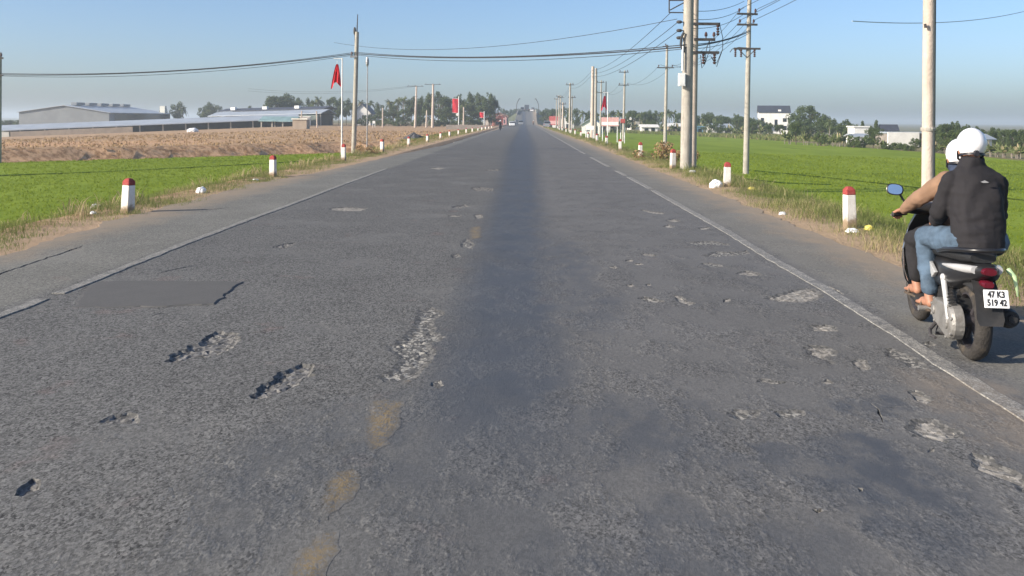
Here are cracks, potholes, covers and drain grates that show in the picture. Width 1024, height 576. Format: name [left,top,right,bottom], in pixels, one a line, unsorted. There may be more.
pothole [98,412,141,424]
pothole [884,348,927,369]
pothole [14,478,42,497]
pothole [164,331,241,364]
pothole [375,307,445,382]
pothole [904,418,964,443]
pothole [764,288,824,302]
pothole [967,452,1024,493]
pothole [249,362,316,399]
pothole [803,344,839,365]
